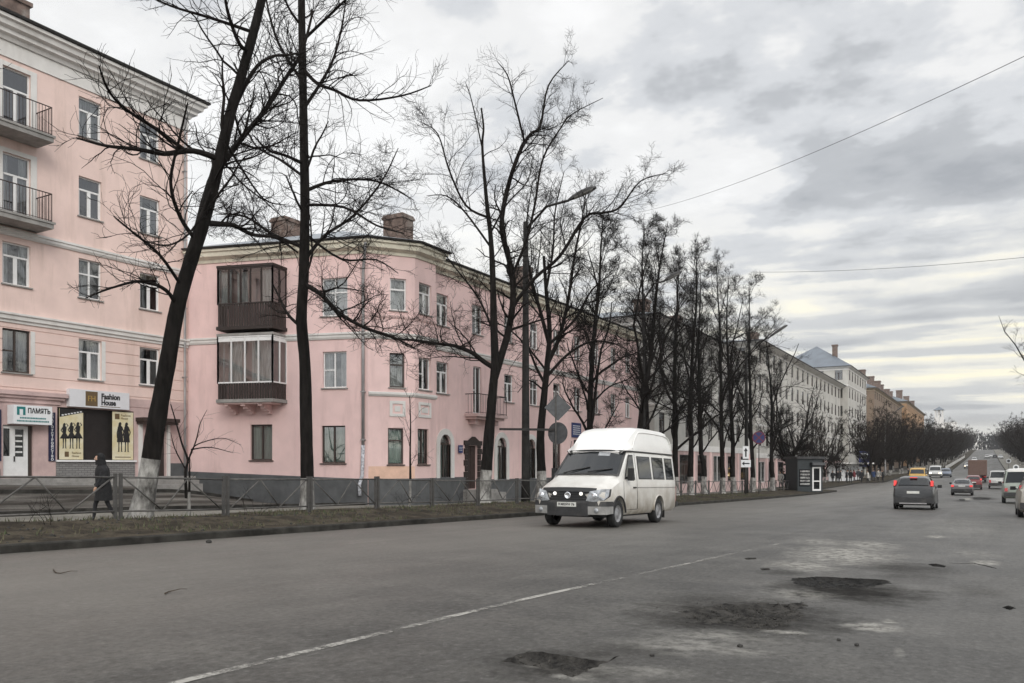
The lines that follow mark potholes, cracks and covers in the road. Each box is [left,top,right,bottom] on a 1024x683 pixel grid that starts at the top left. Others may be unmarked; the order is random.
pothole [642,599,827,637]
pothole [503,651,608,677]
pothole [791,576,892,588]
